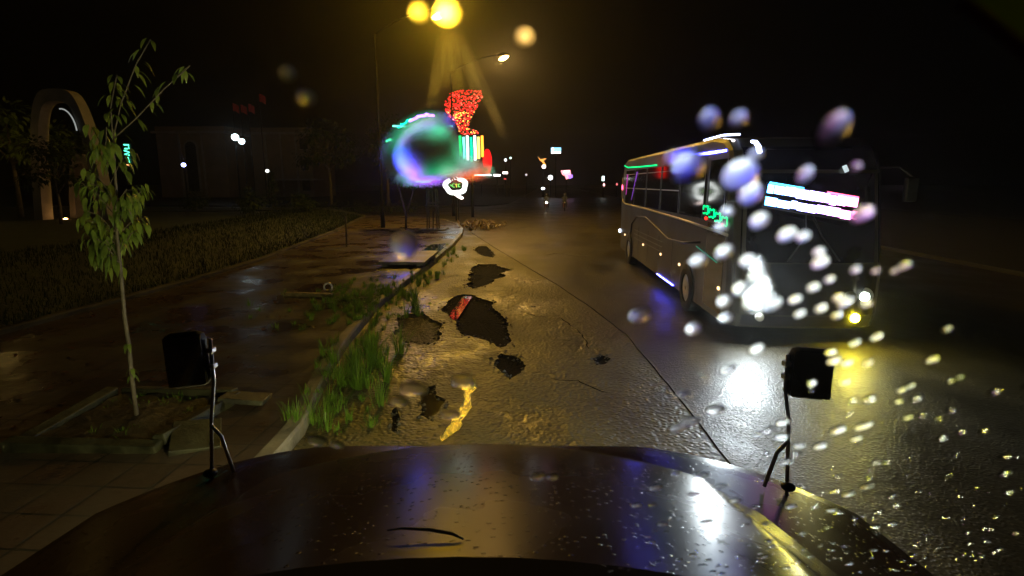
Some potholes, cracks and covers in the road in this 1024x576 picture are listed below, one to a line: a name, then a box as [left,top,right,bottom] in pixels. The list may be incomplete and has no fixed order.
crack [521,311,595,349]
pothole [416,384,448,421]
crack [546,377,607,393]
pothole [386,406,402,434]
pothole [590,353,612,365]
pothole [488,352,532,380]
pothole [438,292,515,352]
pothole [473,245,495,258]
pothole [389,311,445,346]
pothole [463,263,514,289]
